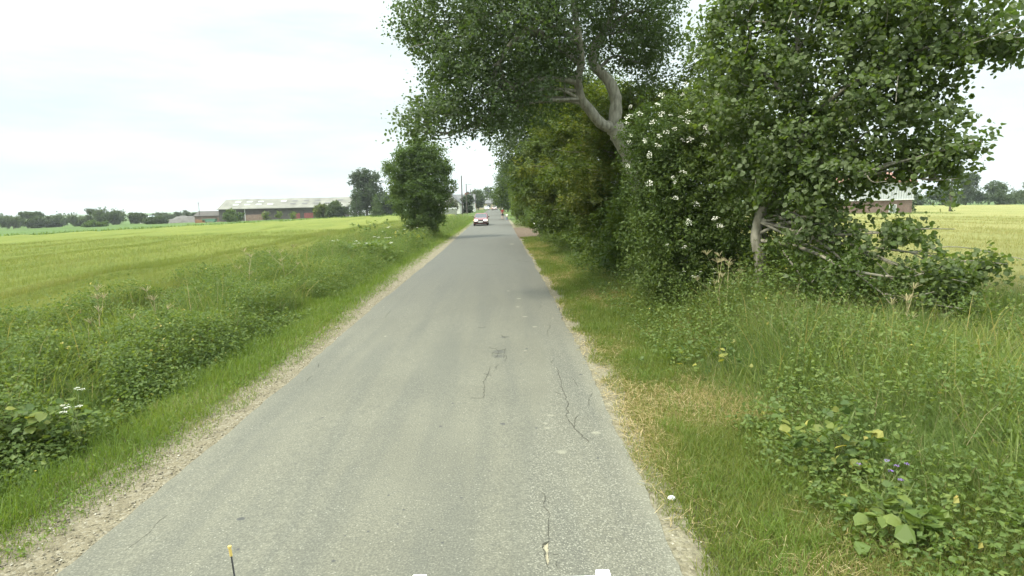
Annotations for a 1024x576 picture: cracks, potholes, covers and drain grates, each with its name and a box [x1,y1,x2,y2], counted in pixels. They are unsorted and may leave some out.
crack [552,360,592,442]
crack [542,493,559,569]
